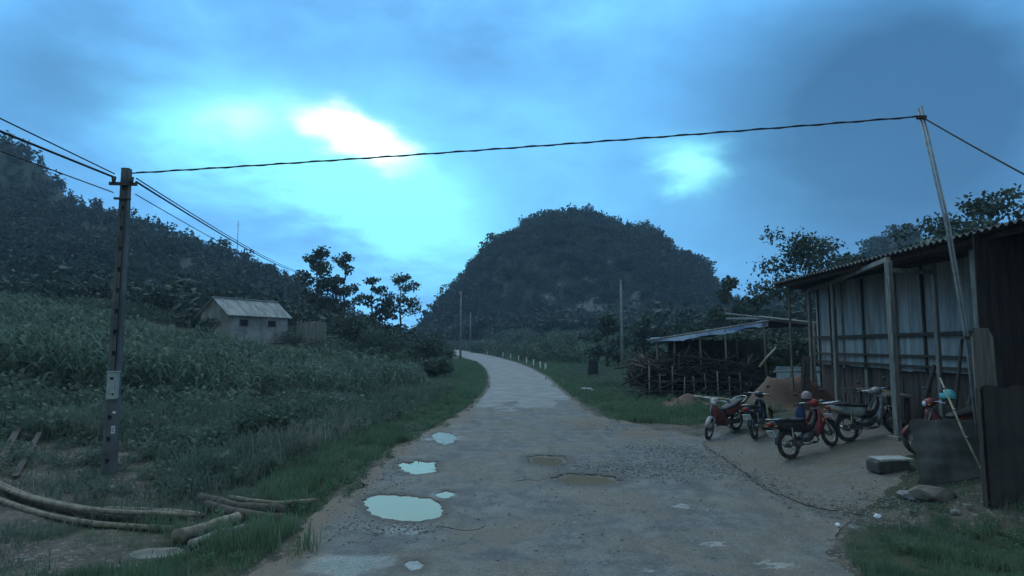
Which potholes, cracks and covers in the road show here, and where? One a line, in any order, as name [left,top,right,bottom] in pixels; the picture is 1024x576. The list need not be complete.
pothole [435,490,455,498]
pothole [395,459,439,474]
pothole [431,431,458,445]
pothole [526,454,568,466]
crack [687,446,818,510]
pothole [550,473,624,485]
pothole [361,493,444,521]
